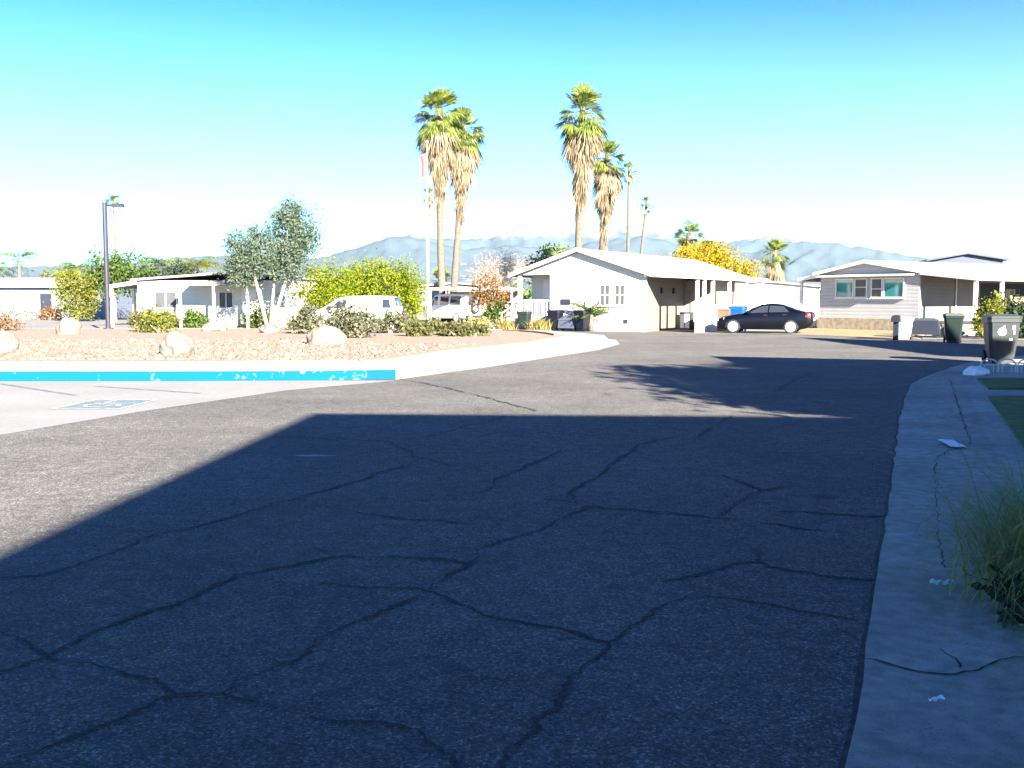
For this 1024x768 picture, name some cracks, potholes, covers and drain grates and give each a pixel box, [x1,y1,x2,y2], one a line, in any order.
crack [865,648,1024,675]
crack [0,416,879,768]
